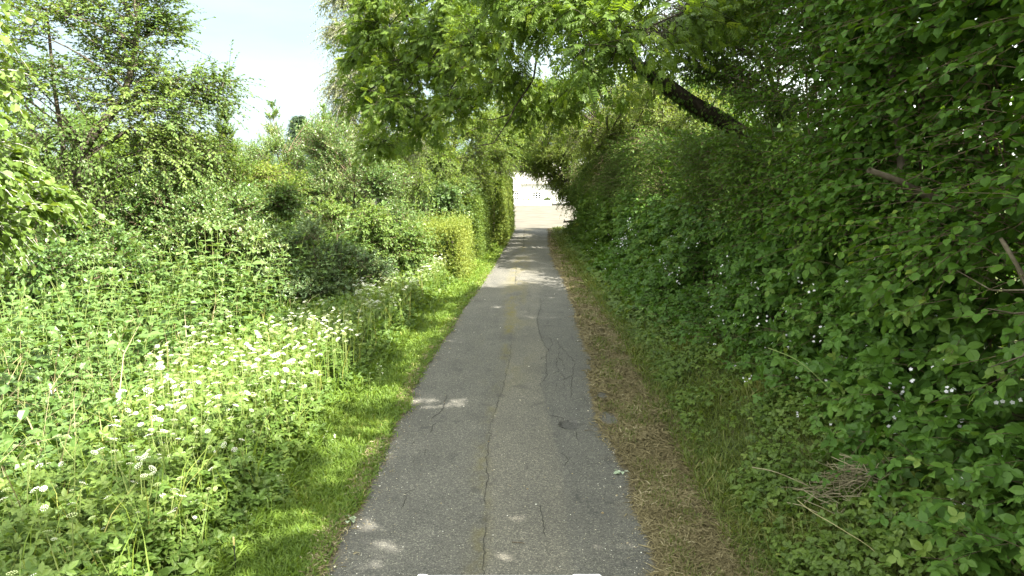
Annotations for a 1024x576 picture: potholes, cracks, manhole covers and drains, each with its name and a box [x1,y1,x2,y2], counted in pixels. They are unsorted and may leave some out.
crack [536,299,587,403]
pothole [559,420,580,430]
